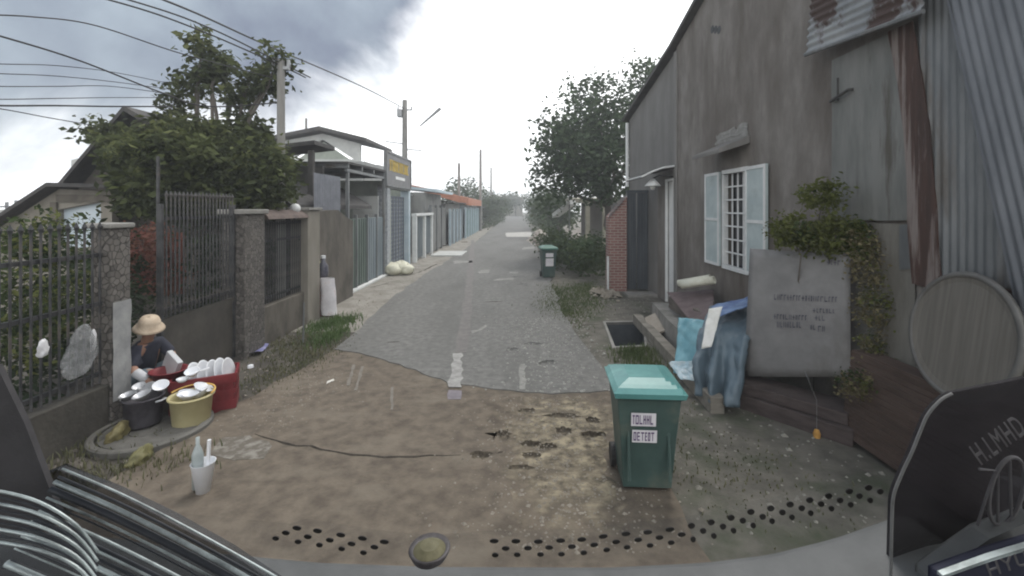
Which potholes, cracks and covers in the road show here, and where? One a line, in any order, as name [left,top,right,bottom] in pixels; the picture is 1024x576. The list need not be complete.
pothole [470,451,494,459]
pothole [495,429,512,440]
crack [255,434,455,458]
